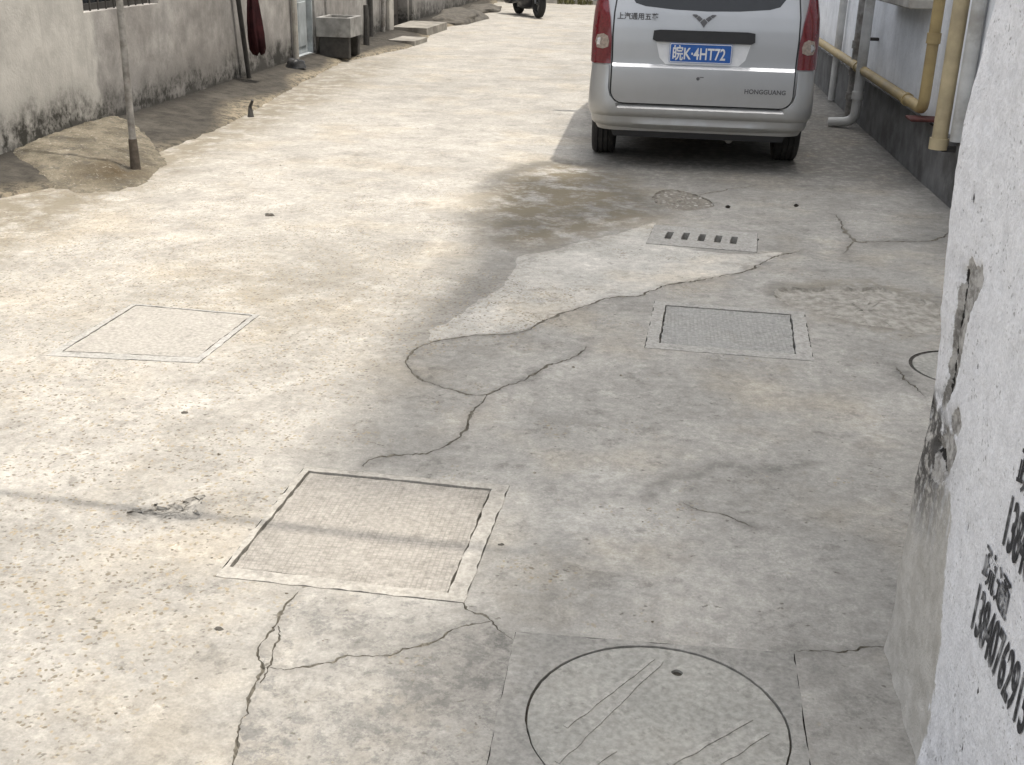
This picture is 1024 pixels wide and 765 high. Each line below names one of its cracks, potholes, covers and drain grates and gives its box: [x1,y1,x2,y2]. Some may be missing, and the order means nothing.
manhole cover [487,632,810,765]
drain grate [646,225,758,253]
manhole cover [216,466,509,604]
manhole cover [645,301,814,361]
pothole [125,495,206,525]
crack [362,251,800,467]
manhole cover [46,304,259,363]
crack [232,592,513,765]
crack [836,215,948,251]
crack [684,503,755,528]
manhole cover [909,351,939,380]
